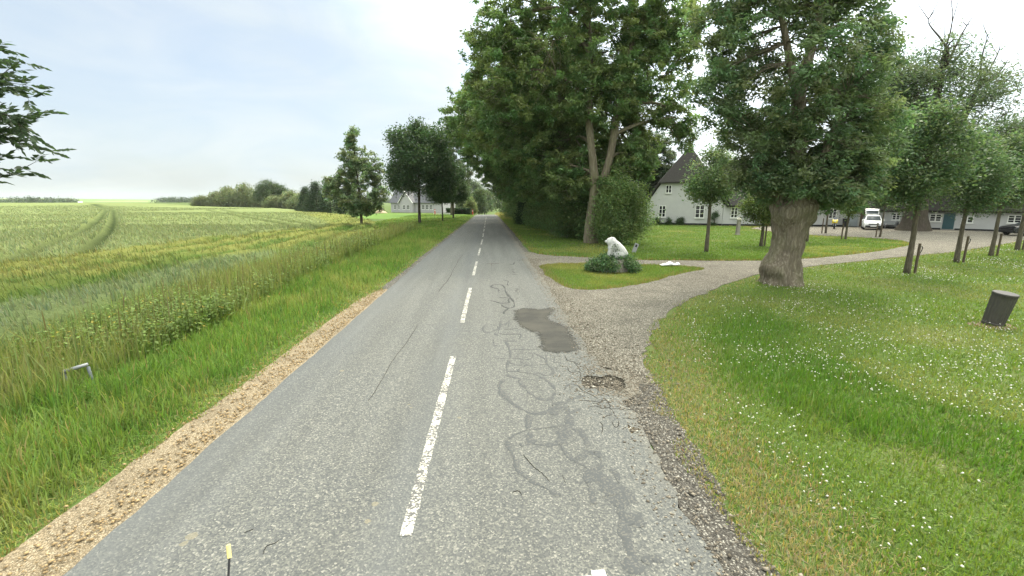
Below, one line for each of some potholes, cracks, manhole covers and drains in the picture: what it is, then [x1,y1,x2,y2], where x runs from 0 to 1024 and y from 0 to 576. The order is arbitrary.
crack [565,356,638,433]
pothole [581,375,626,391]
